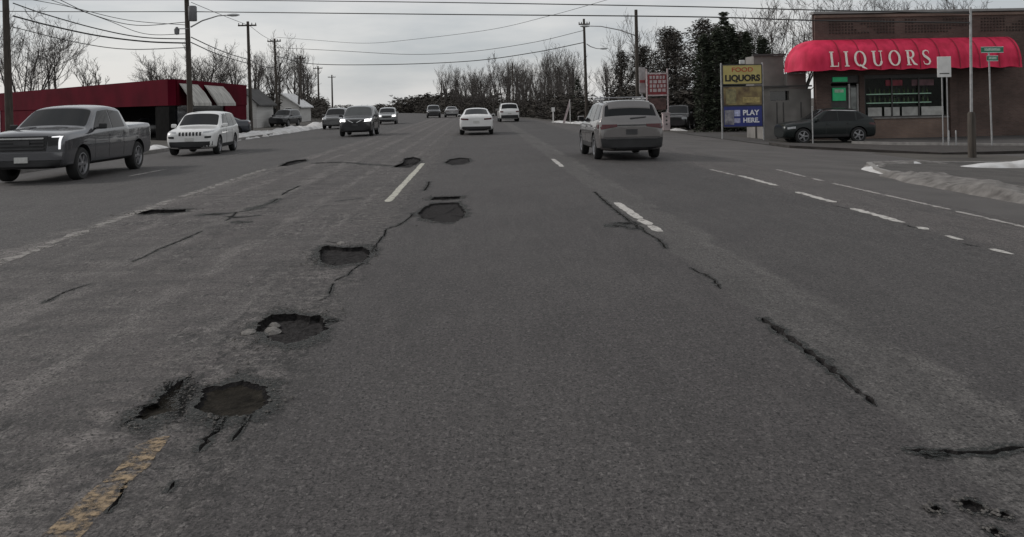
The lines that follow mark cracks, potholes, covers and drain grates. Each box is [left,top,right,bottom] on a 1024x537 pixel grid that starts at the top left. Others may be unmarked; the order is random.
crack [41,283,91,303]
crack [132,186,299,262]
crack [755,316,878,407]
pothole [114,371,201,442]
crack [900,442,1024,461]
crack [593,191,669,249]
crack [191,414,253,453]
pothole [444,157,474,165]
pothole [167,368,290,433]
pothole [952,497,994,518]
pothole [391,157,424,168]
pothole [309,243,381,269]
